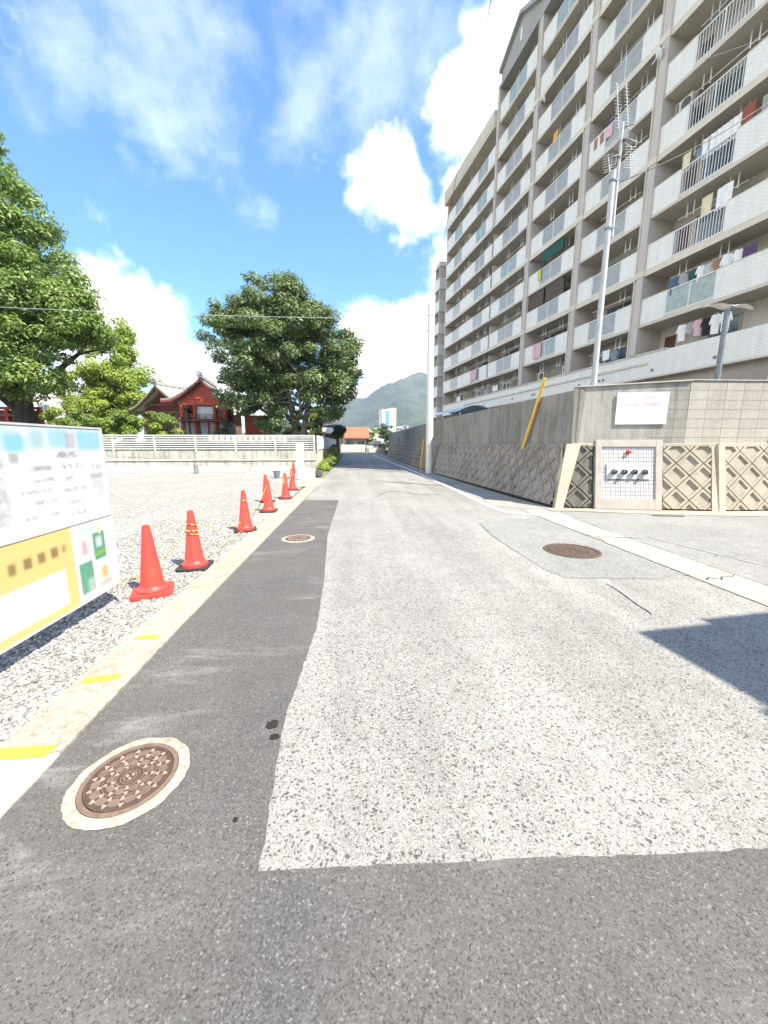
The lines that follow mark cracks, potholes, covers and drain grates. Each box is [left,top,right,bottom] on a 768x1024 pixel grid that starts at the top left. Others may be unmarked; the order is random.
manhole cover [543,543,602,559]
manhole cover [61,737,190,830]
manhole cover [281,534,315,543]
